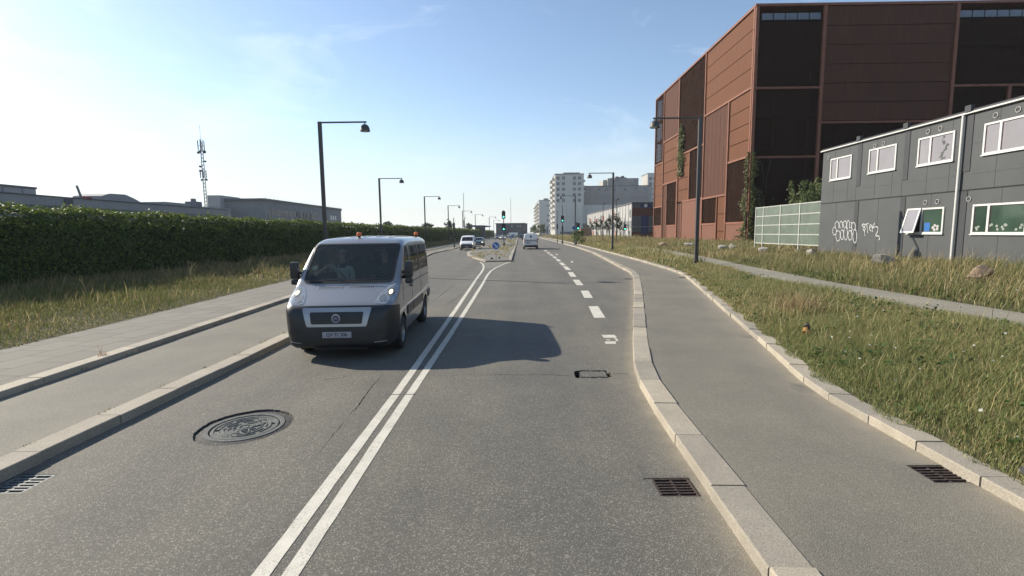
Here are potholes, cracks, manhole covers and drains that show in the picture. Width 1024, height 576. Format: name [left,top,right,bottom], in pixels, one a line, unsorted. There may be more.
drain grate [0,475,54,493]
drain grate [908,466,971,483]
crack [321,375,381,450]
drain grate [652,478,700,497]
manhole cover [193,409,294,446]
